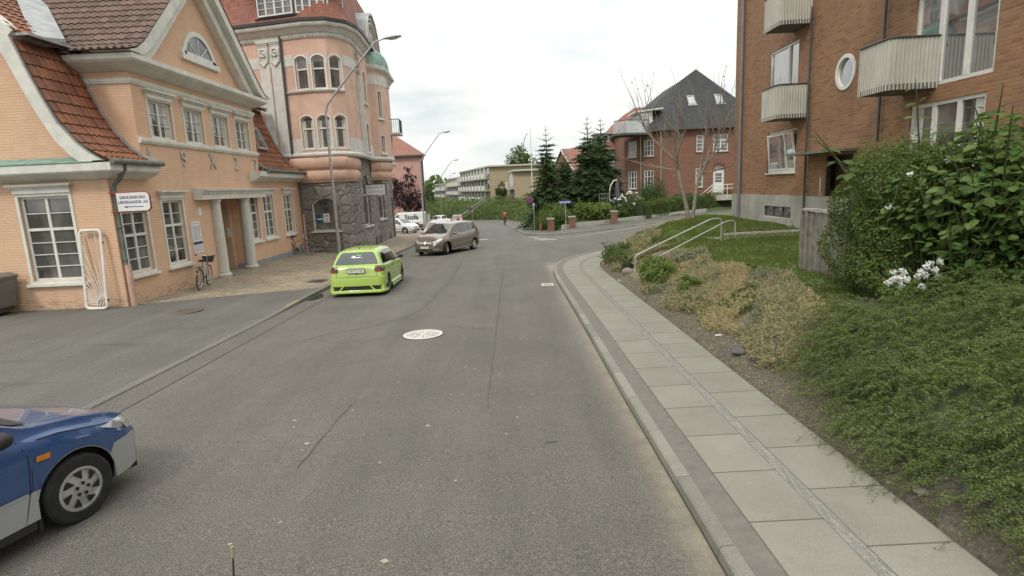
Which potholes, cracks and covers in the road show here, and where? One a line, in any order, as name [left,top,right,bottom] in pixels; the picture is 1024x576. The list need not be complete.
crack [297,402,355,470]
crack [303,257,464,341]
manhole cover [402,329,444,340]
